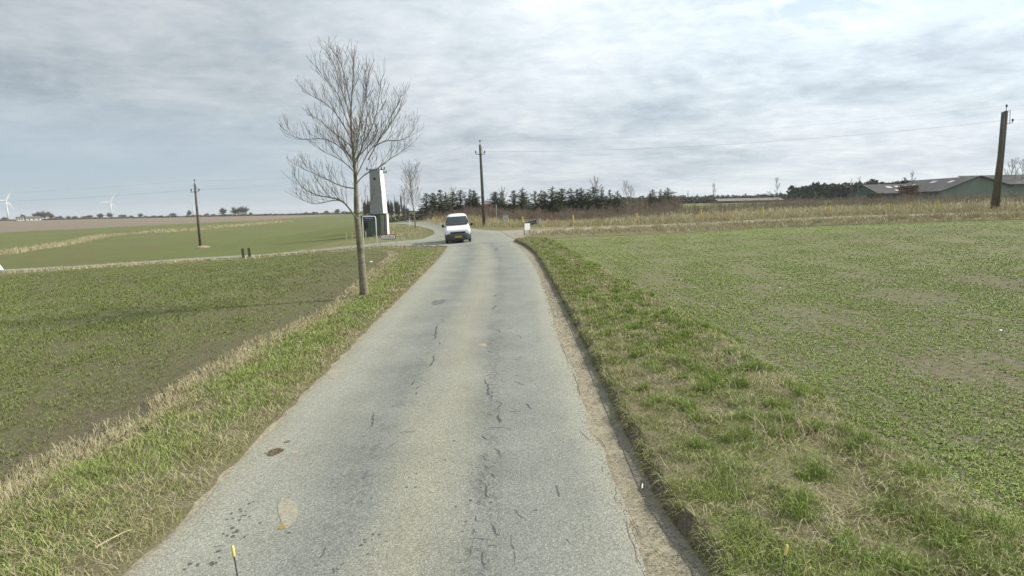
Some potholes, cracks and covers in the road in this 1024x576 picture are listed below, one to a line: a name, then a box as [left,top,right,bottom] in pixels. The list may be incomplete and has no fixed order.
crack [467,374,535,566]
crack [614,491,642,568]
